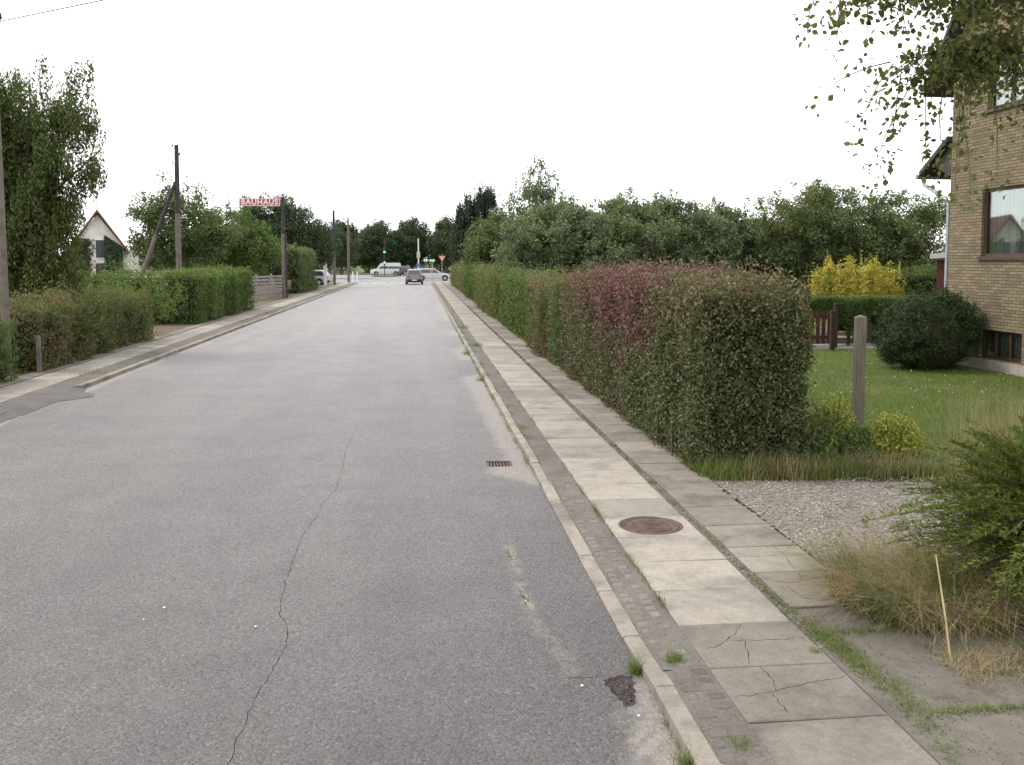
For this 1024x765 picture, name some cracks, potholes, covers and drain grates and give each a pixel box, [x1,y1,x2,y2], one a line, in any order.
crack [707,626,844,714]
pothole [516,583,535,610]
pothole [604,675,636,707]
manhole cover [618,516,683,535]
pothole [507,547,517,567]
crack [227,425,357,765]
